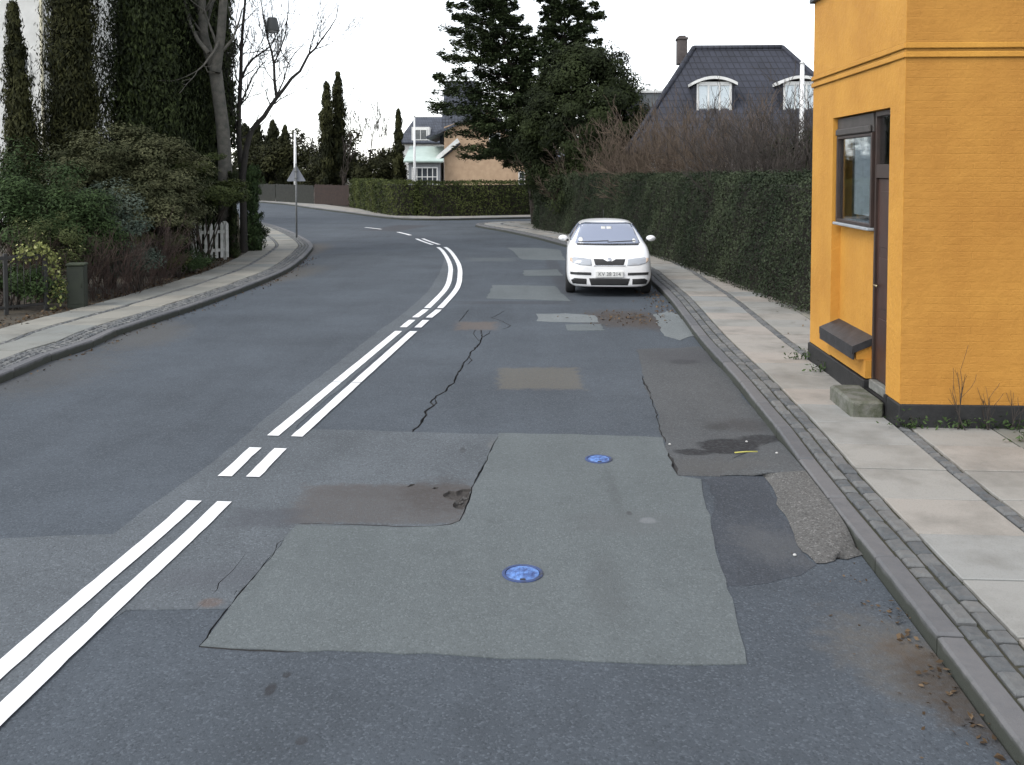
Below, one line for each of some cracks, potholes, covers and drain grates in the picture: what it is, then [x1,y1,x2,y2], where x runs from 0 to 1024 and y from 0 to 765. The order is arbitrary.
manhole cover [585,454,612,463]
crack [412,311,511,432]
manhole cover [502,564,543,583]
